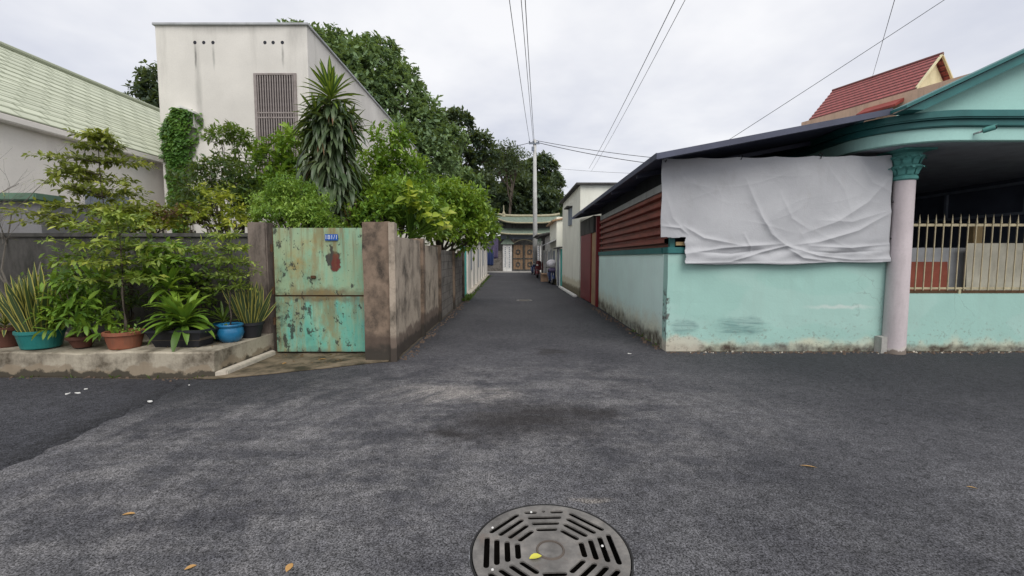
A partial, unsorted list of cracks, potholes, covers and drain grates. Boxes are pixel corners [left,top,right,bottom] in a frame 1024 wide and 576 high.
manhole cover [469,504,634,576]
